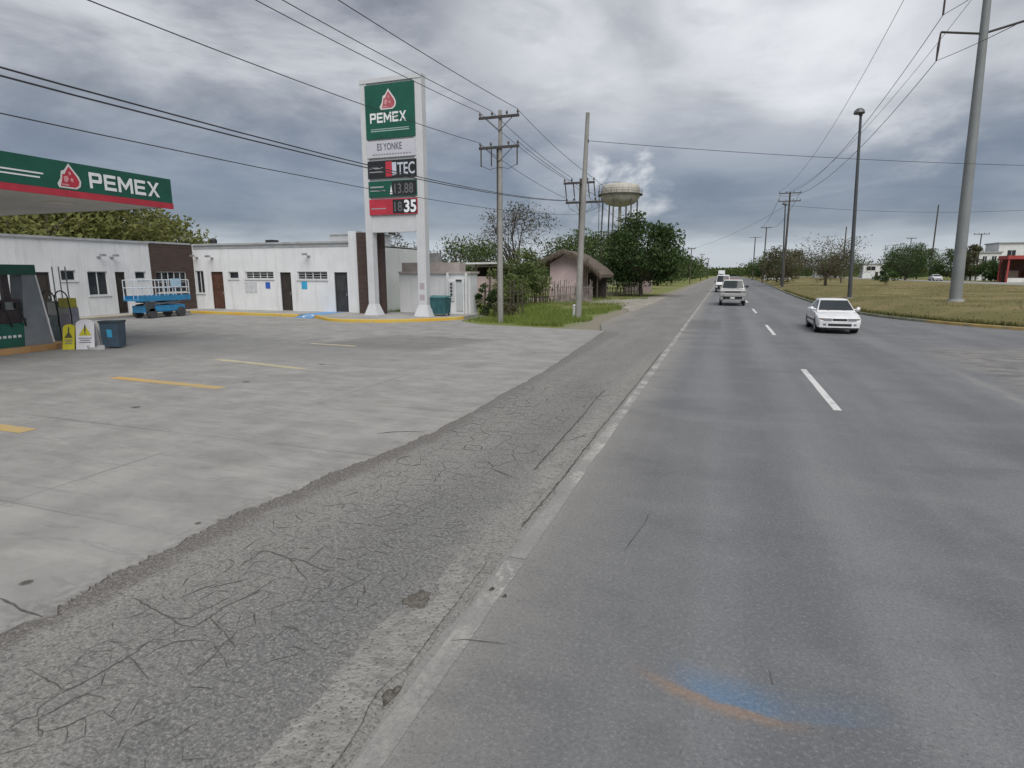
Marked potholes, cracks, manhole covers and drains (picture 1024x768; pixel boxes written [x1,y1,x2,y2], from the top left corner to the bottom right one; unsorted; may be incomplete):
pothole [381,685,402,708]
pothole [402,587,431,609]
crack [1,466,493,768]
crack [397,353,661,527]
